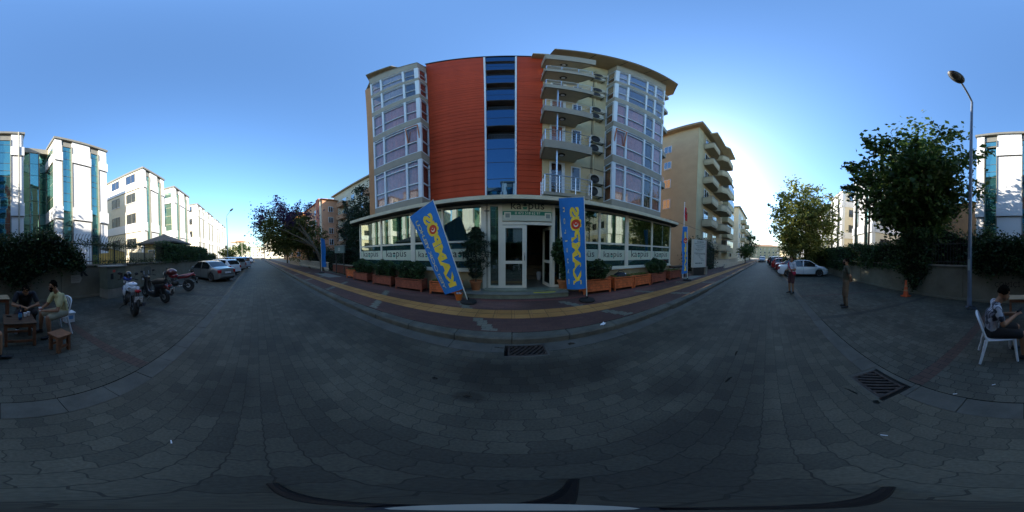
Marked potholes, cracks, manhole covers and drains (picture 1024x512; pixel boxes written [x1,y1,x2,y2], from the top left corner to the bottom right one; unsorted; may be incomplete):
drain grate [508,344,548,356]
drain grate [852,370,904,399]
